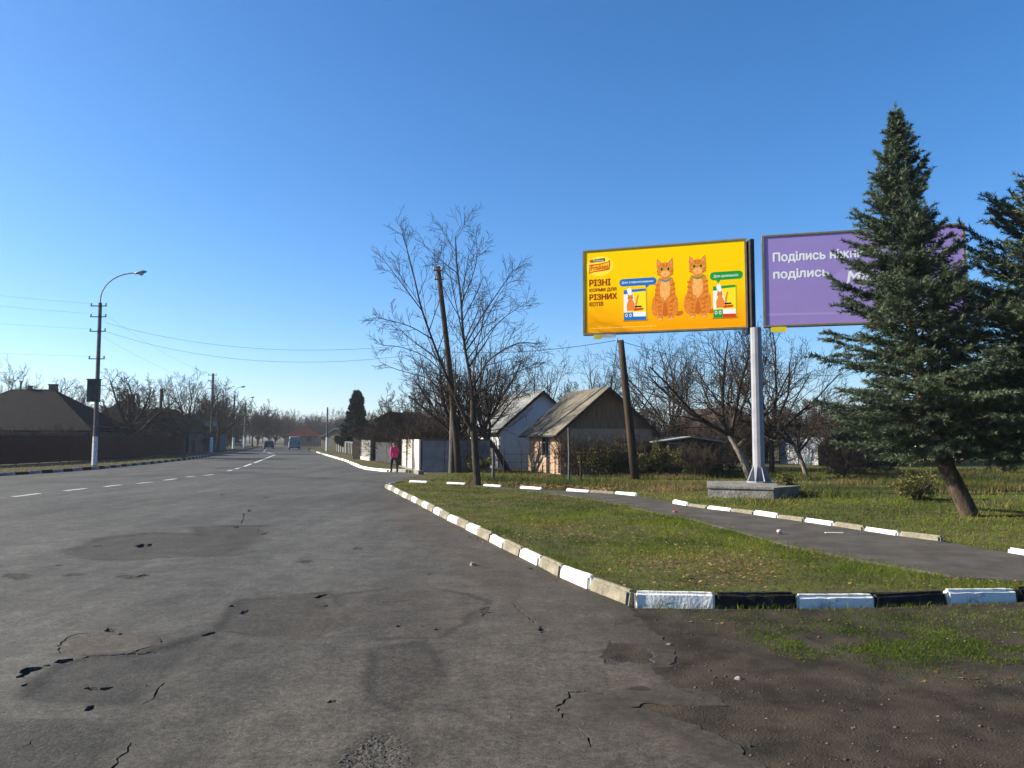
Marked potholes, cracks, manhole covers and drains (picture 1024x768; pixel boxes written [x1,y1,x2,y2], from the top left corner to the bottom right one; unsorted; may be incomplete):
pothole [16,667,46,678]
crack [555,692,620,747]
crack [111,743,131,768]
